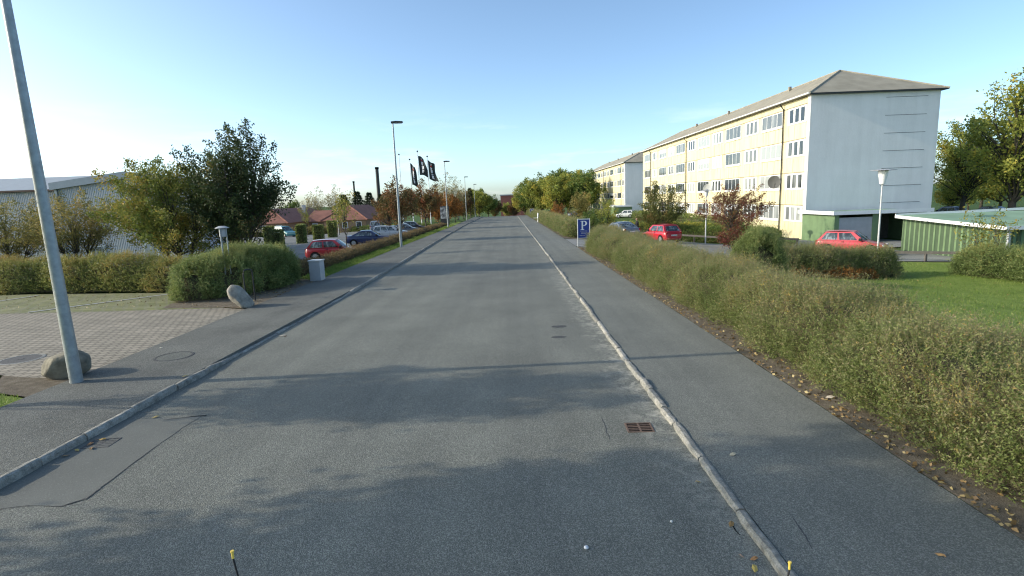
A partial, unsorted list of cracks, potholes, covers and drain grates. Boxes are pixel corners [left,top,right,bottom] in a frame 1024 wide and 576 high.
manhole cover [0,354,46,365]
drain grate [624,422,655,433]
manhole cover [153,351,195,361]
